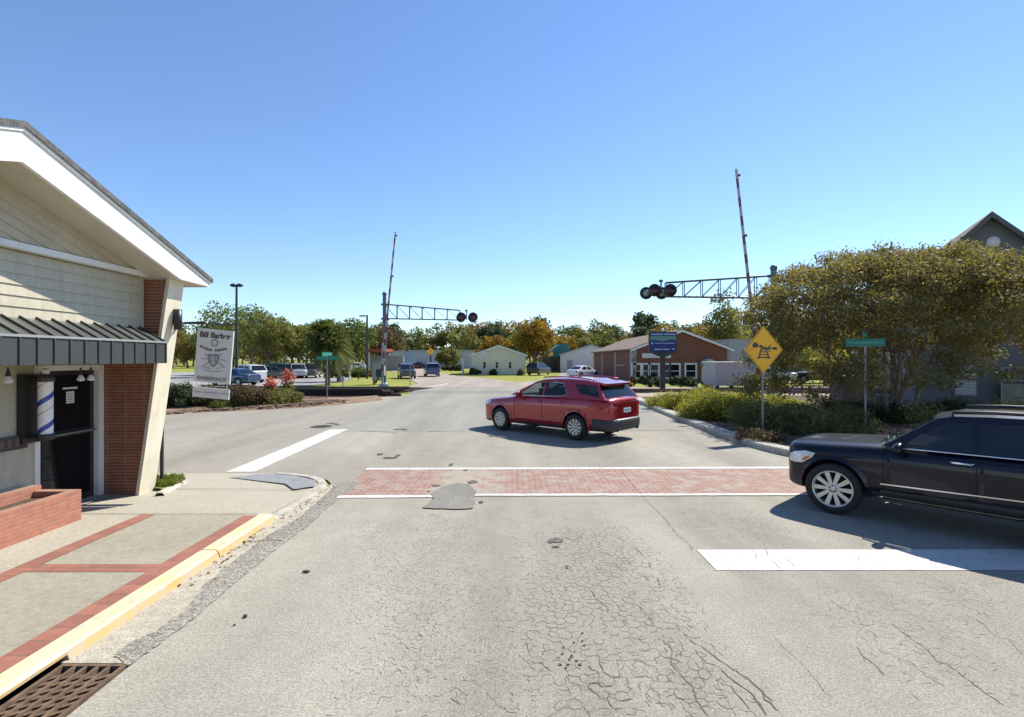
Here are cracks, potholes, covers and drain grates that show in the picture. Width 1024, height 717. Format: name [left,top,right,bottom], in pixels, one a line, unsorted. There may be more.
crack [811,576,1024,705]
drain grate [0,664,131,717]
crack [322,514,778,717]
